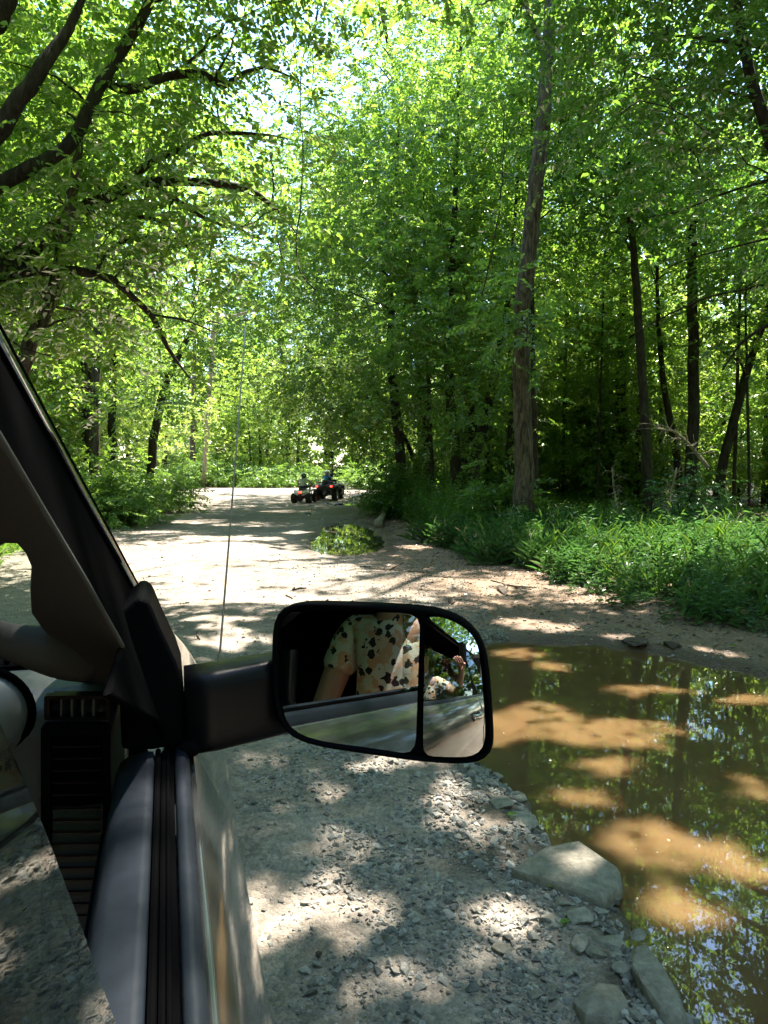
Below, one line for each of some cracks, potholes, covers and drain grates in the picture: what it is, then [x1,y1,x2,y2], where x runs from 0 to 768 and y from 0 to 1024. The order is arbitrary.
pothole [454,633,768,1024]
pothole [300,522,393,557]
